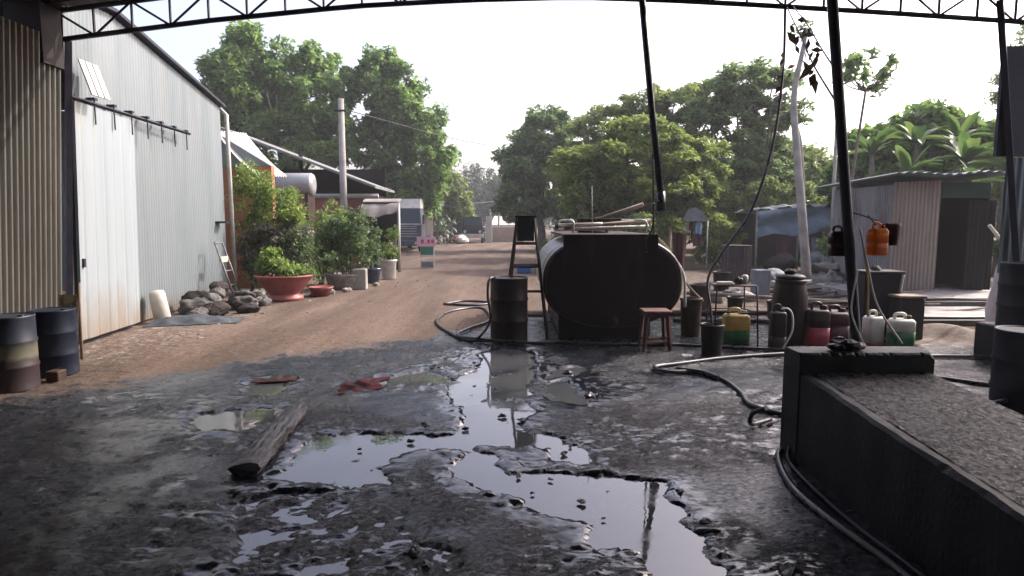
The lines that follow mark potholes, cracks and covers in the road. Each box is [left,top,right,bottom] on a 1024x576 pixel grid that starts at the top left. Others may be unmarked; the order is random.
pothole [457,451,727,576]
pothole [448,348,538,404]
pothole [181,407,279,432]
pothole [444,400,598,464]
pothole [271,429,419,486]
pothole [208,485,463,576]
pothole [541,380,596,403]
